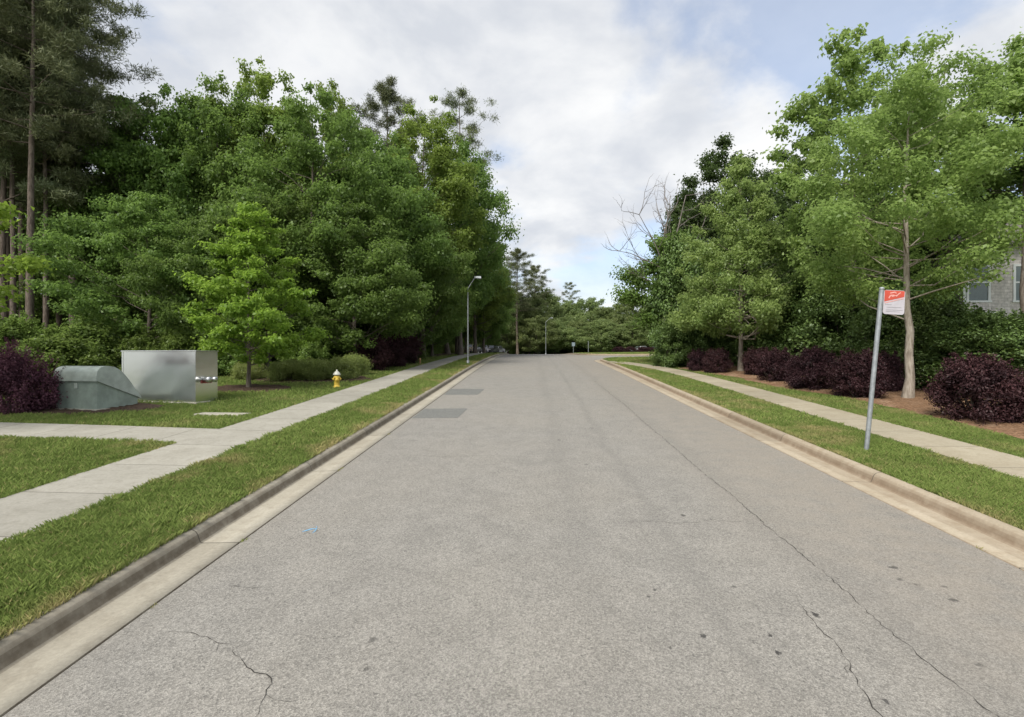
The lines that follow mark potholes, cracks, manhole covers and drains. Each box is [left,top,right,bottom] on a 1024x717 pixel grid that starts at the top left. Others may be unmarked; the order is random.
crack [601,386,999,717]
crack [177,631,294,716]
